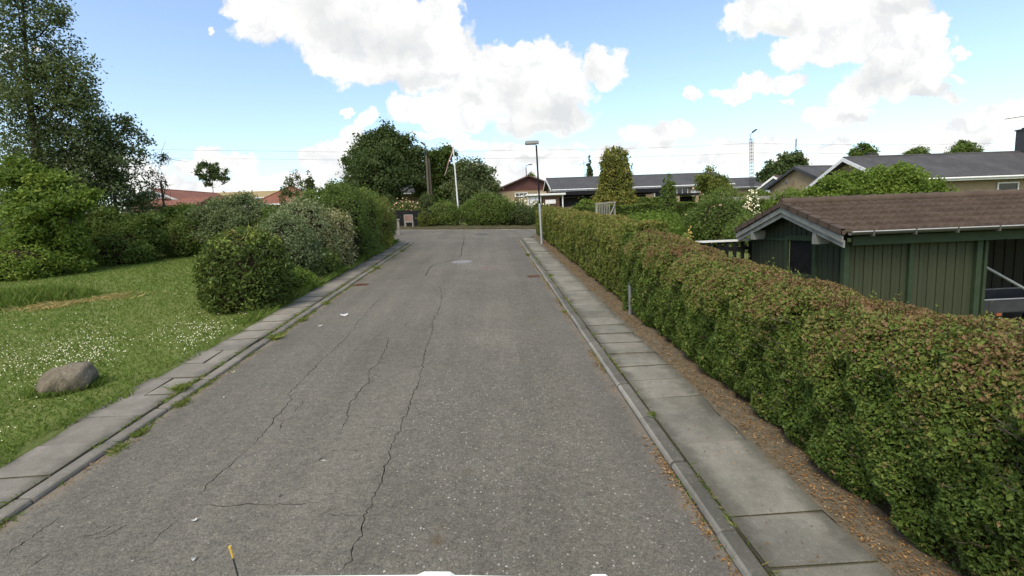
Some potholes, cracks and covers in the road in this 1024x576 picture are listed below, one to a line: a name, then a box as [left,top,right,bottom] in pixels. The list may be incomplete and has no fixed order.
crack [198,240,464,571]
crack [7,494,132,570]
